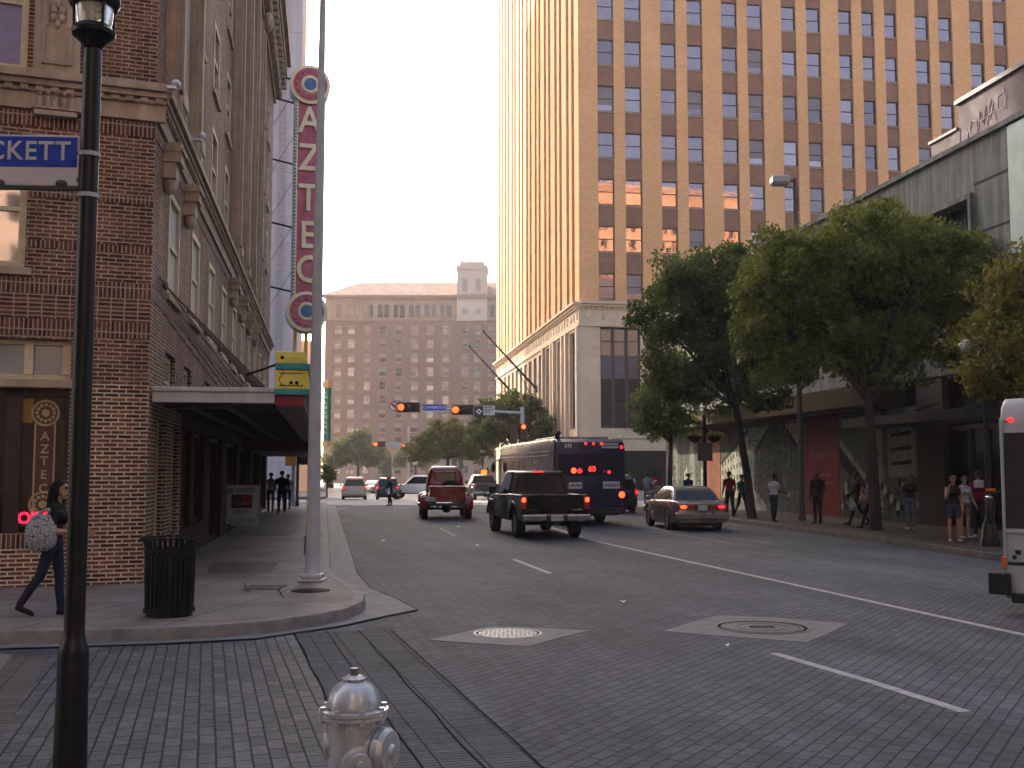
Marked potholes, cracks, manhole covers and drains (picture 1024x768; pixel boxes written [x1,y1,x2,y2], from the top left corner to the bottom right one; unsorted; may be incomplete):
manhole cover [429,626,589,647]
manhole cover [664,615,850,643]
